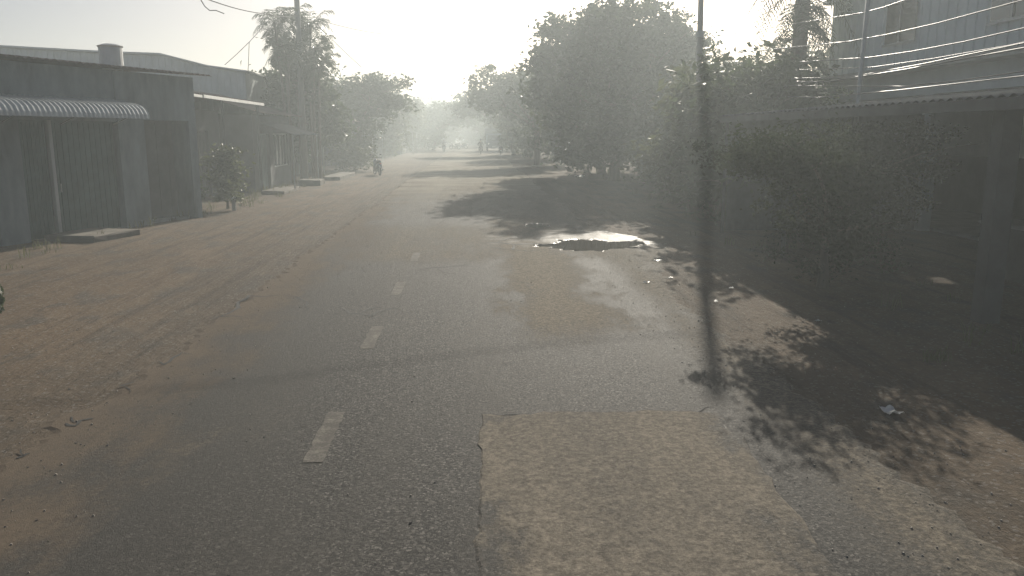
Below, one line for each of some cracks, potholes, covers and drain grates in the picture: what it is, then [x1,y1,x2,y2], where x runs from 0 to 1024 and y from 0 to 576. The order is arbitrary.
pothole [533,239,649,251]
